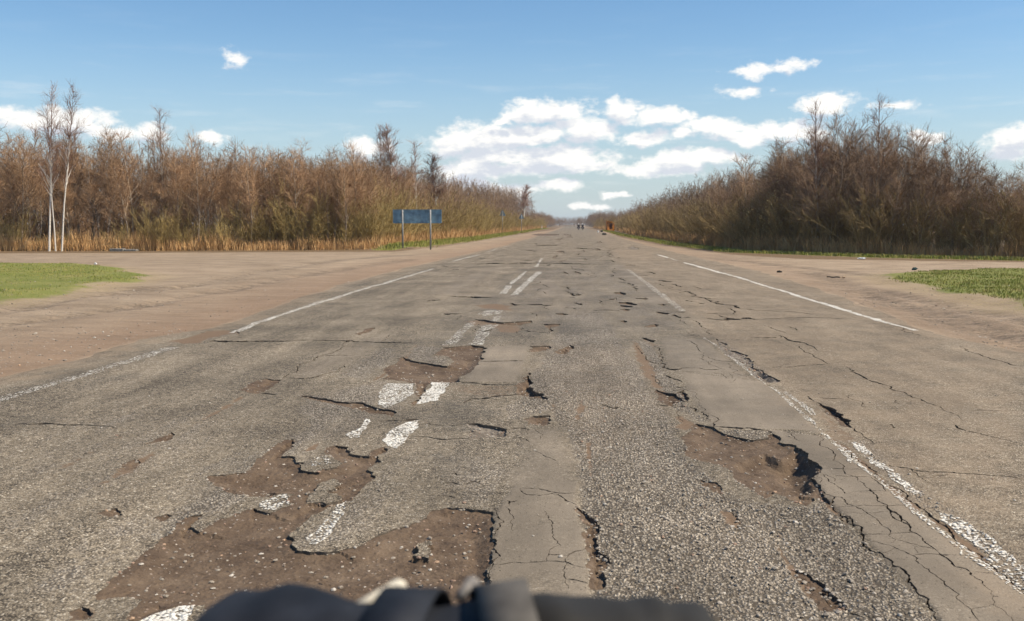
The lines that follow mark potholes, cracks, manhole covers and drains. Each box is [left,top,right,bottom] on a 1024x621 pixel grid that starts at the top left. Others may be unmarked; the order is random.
pothole [383,345,487,406]
pothole [513,373,549,401]
pothole [95,439,497,621]
crack [814,439,1013,621]
crack [487,243,848,440]
crack [210,333,401,395]
